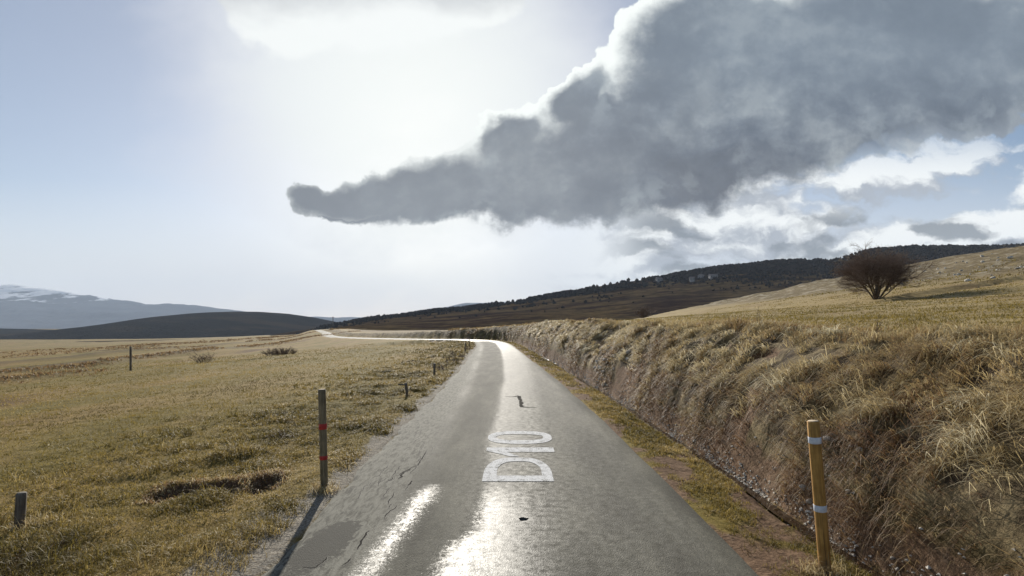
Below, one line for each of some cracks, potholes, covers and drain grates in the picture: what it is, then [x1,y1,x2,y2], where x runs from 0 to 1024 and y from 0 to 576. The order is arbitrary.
crack [505,396,537,408]
crack [302,429,442,569]
